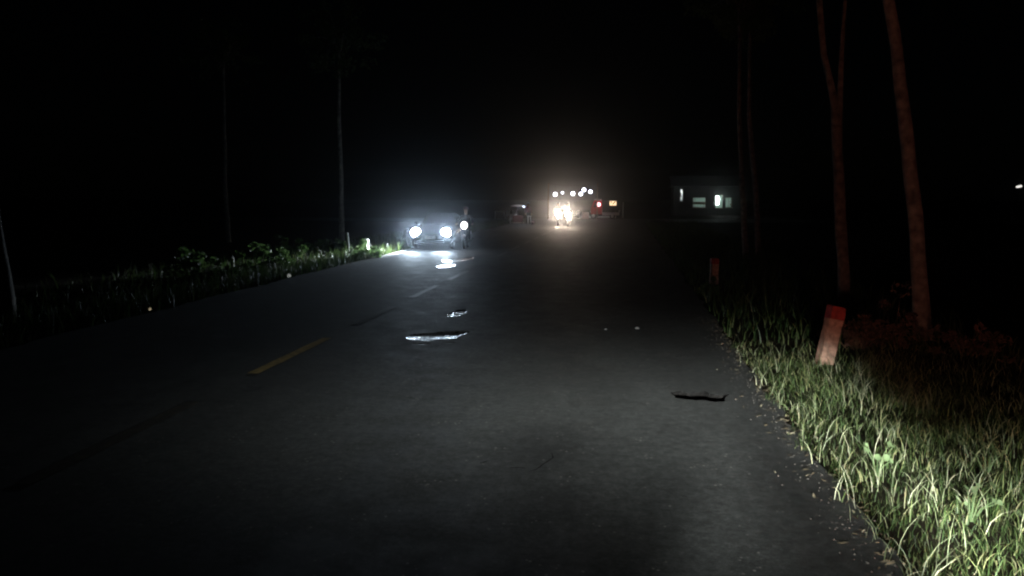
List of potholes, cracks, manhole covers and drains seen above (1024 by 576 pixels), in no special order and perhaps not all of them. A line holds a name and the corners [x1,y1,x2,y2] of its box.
pothole [406,331,473,344]
pothole [671,391,729,402]
